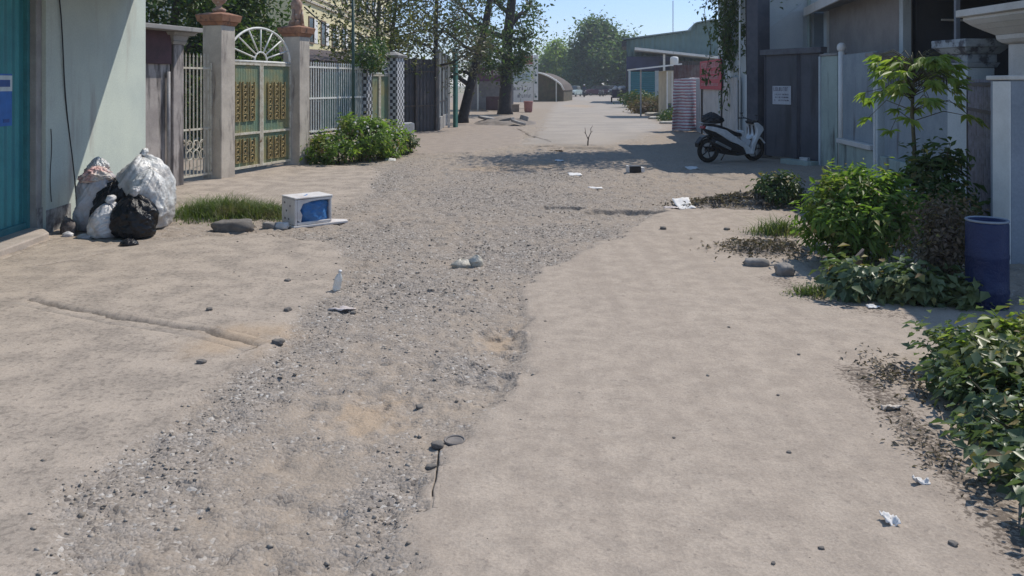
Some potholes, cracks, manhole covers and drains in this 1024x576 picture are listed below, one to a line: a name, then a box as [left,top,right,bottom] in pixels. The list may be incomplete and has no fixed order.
pothole [468,326,532,360]
crack [9,295,272,351]
